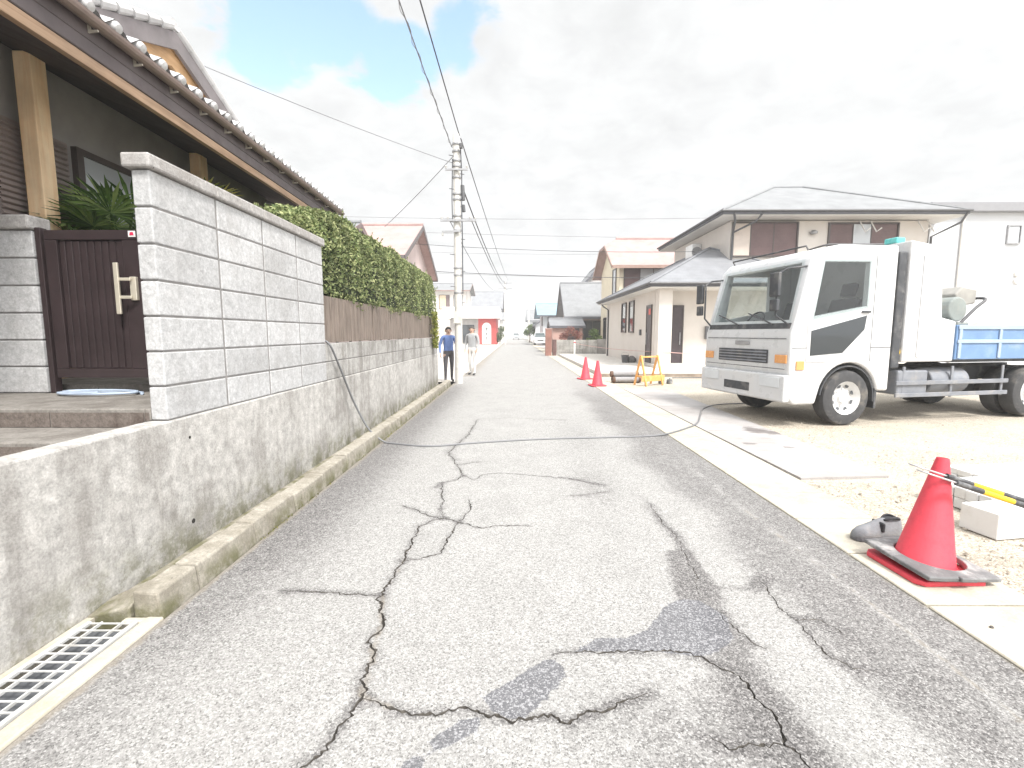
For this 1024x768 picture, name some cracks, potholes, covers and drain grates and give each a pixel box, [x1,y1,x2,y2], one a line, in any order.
crack [555,615,810,768]
crack [295,423,648,768]
drain grate [0,617,164,753]
crack [651,506,699,594]
